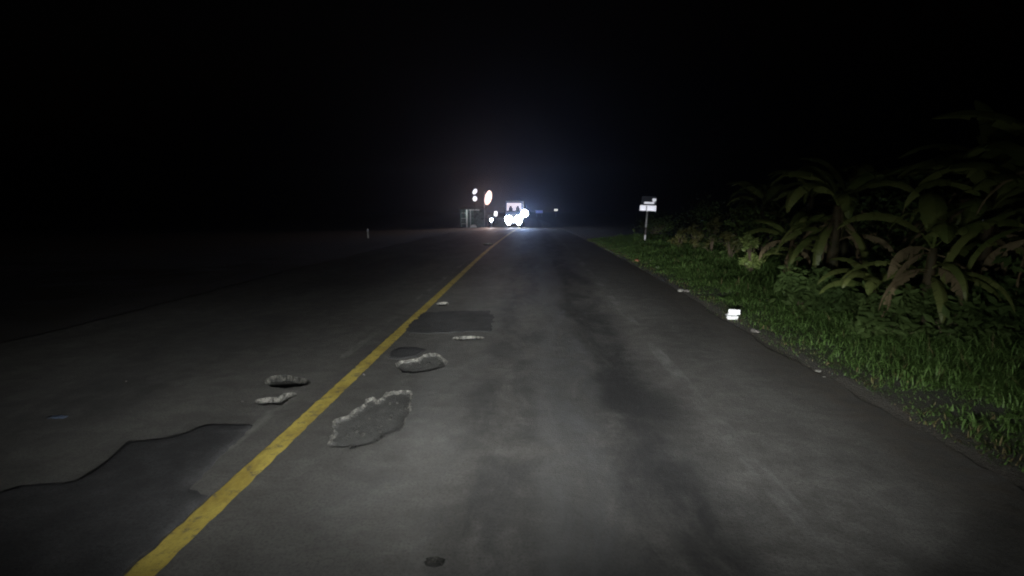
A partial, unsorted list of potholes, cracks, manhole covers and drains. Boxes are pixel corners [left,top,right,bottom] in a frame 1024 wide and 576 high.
pothole [255,392,297,406]
pothole [395,353,448,374]
pothole [327,390,413,449]
pothole [424,556,445,567]
pothole [264,374,311,389]
